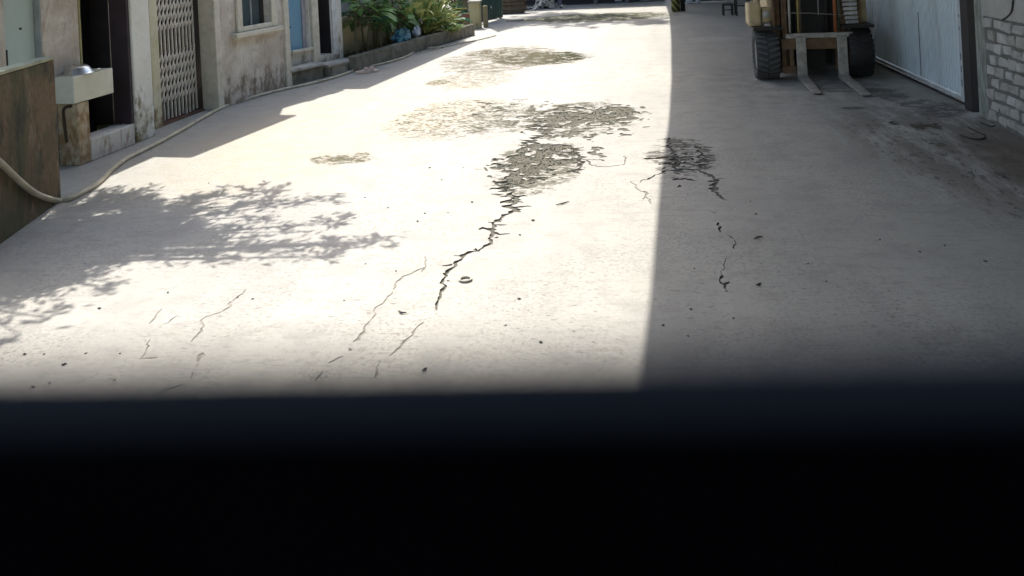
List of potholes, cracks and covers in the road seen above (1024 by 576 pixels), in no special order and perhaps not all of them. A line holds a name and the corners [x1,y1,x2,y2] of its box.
crack [140,289,246,359]
pothole [472,99,652,142]
crack [597,138,737,289]
crack [348,187,532,355]
pothole [484,138,608,194]
